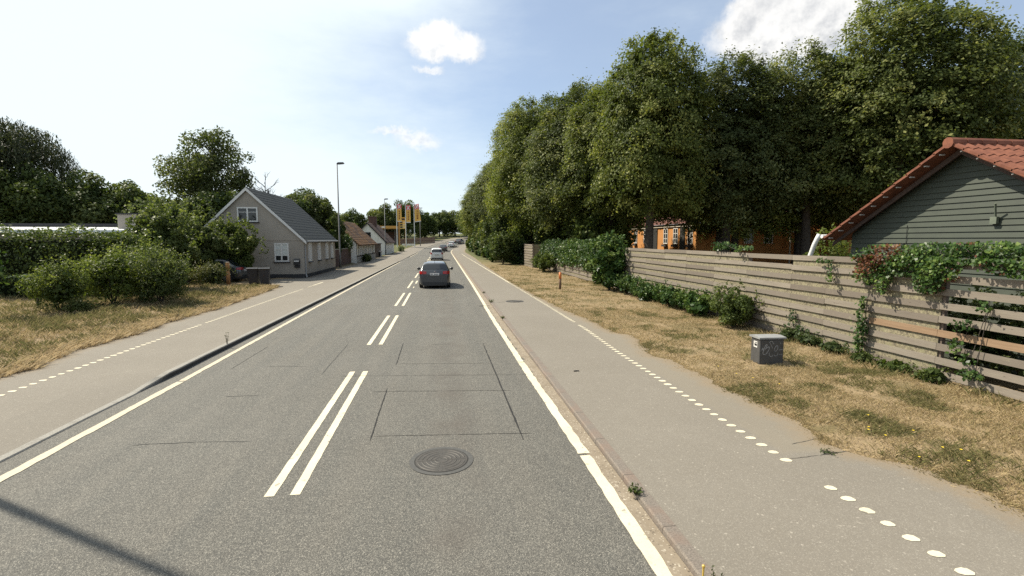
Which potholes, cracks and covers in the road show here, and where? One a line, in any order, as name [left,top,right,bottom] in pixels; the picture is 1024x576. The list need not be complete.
manhole cover [409,447,473,475]
